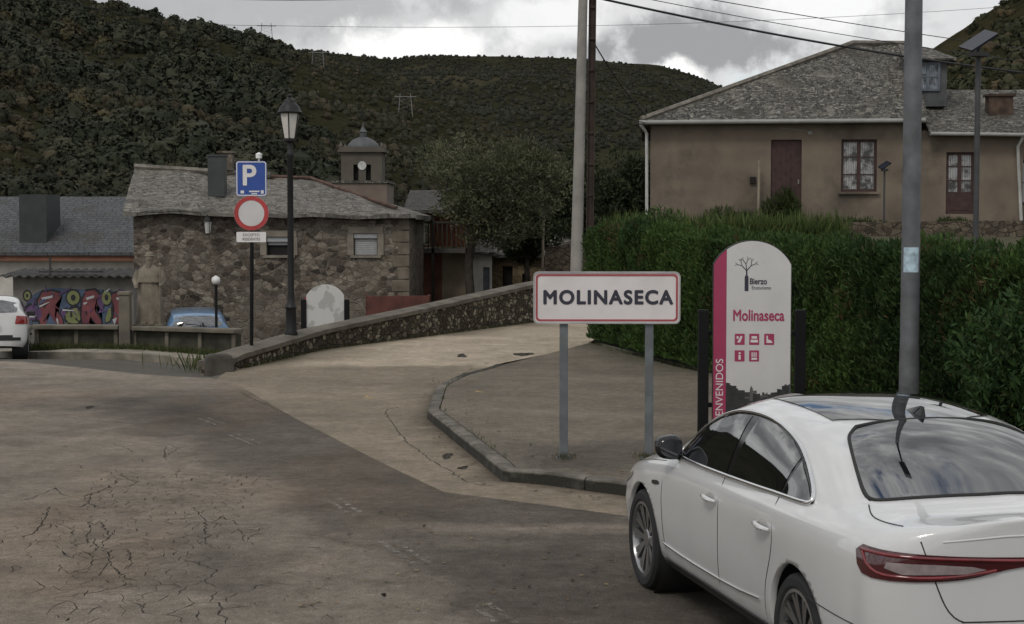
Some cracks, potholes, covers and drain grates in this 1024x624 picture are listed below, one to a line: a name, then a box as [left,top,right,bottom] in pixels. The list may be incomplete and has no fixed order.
crack [129,508,314,624]
crack [2,443,269,623]
crack [385,407,492,486]
